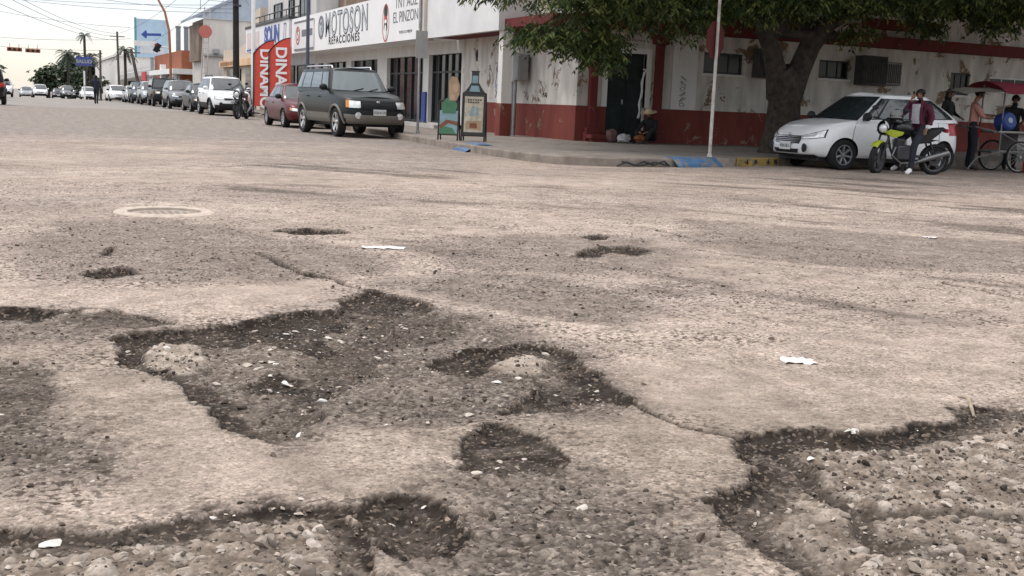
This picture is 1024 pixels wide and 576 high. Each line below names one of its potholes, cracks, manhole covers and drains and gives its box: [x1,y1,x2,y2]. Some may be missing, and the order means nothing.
pothole [0,307,62,322]
pothole [696,404,1024,576]
pothole [105,291,436,445]
pothole [0,502,392,576]
pothole [423,342,645,416]
pothole [568,245,652,258]
manhole cover [113,206,215,217]
pothole [269,227,352,235]
crack [235,251,304,275]
pothole [95,246,123,257]
pothole [448,421,575,479]
pothole [344,487,478,564]
